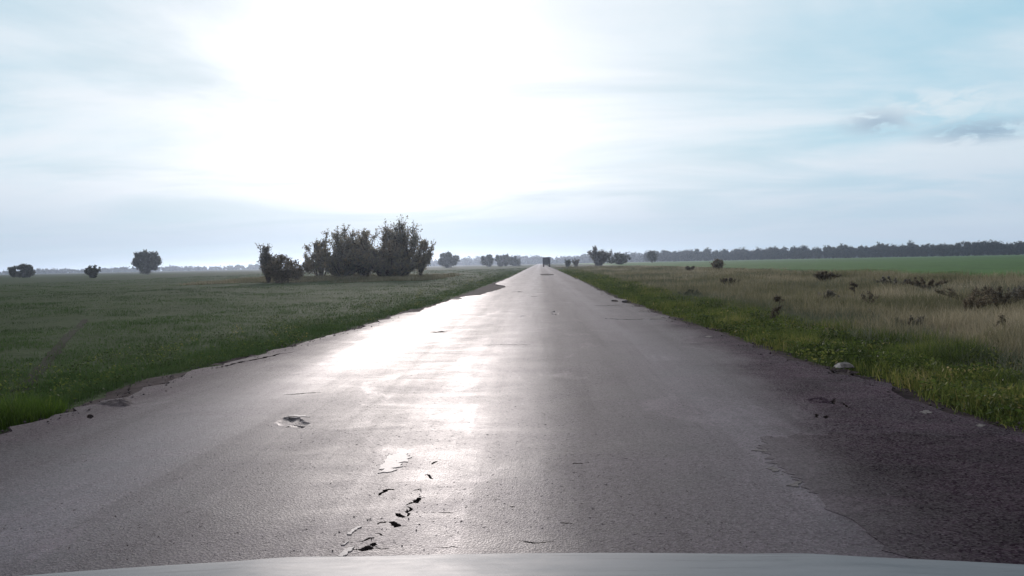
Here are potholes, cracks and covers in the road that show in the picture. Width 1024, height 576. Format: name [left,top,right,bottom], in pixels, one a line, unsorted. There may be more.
pothole [274,417,310,428]
